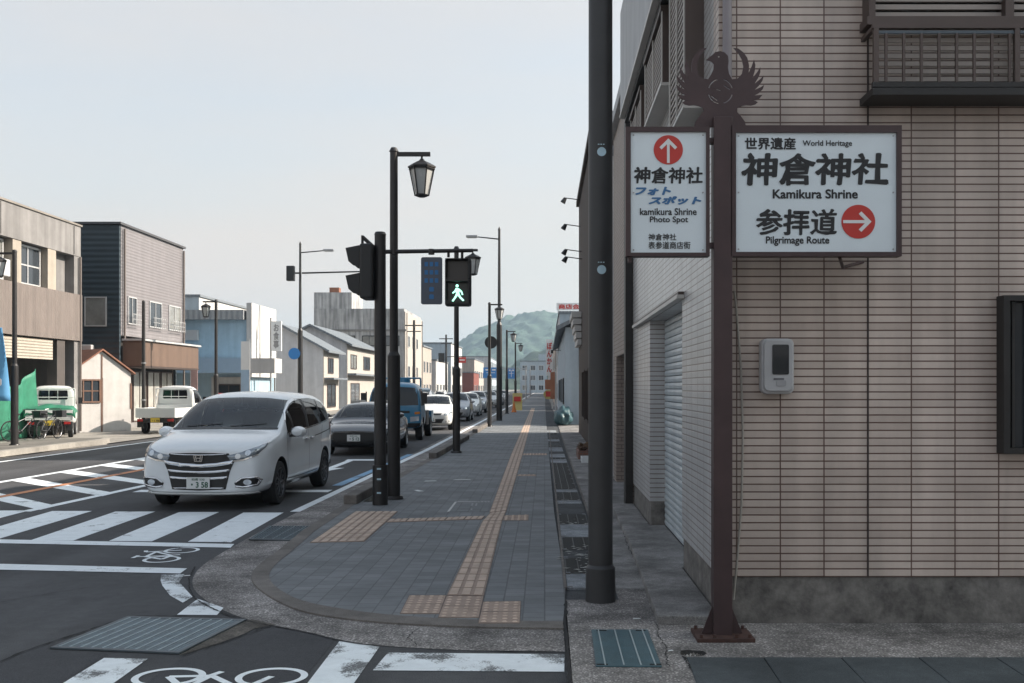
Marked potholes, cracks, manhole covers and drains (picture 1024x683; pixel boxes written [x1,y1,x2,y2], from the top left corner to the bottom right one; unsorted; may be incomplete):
drain grate [249,526,309,541]
drain grate [180,619,276,655]
drain grate [50,616,247,655]
